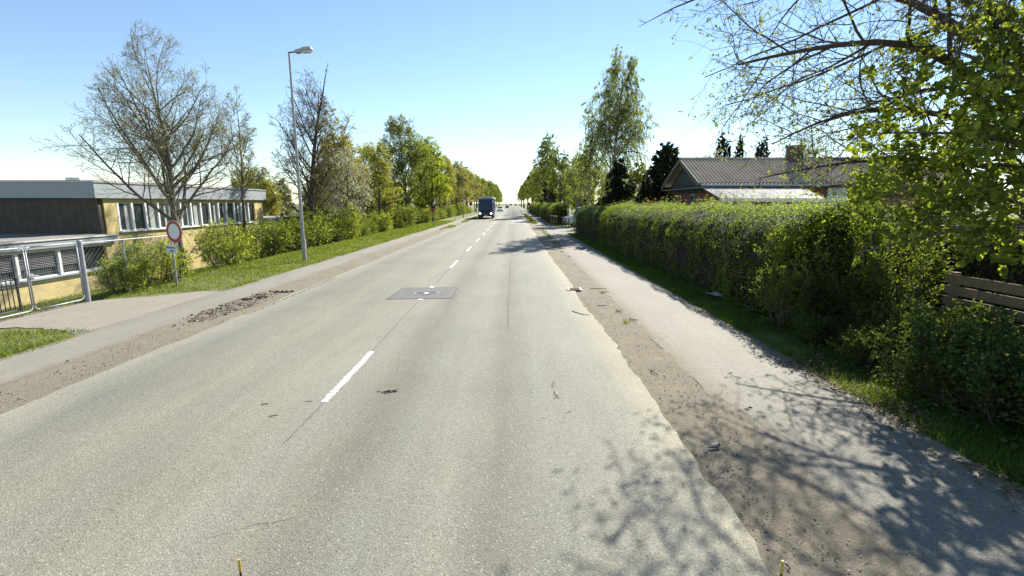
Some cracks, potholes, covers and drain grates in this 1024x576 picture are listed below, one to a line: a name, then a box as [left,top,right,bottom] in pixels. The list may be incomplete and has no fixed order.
crack [283,403,323,444]
